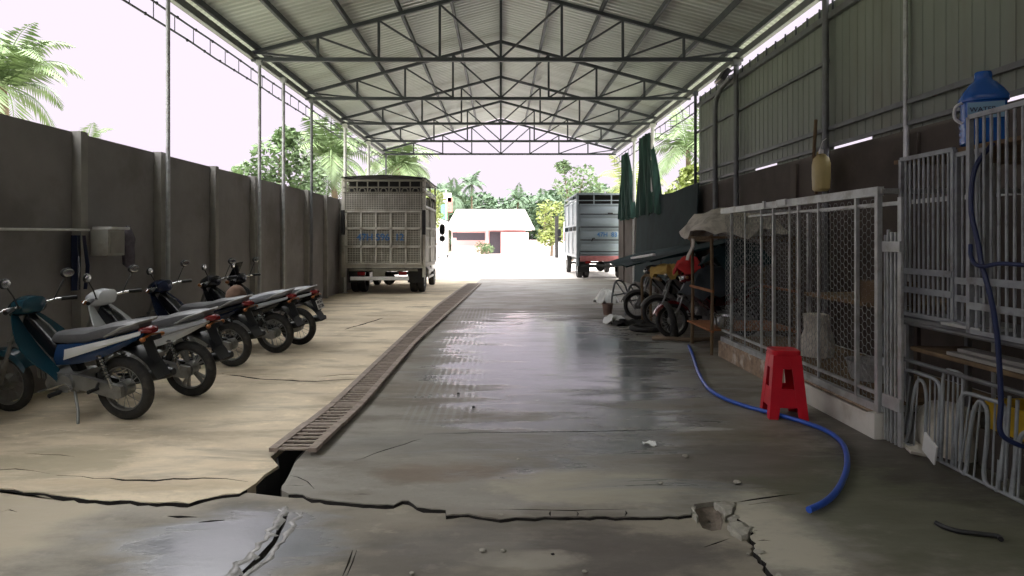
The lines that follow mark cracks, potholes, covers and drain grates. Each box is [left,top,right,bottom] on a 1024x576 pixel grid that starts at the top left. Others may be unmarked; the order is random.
pothole [696,506,723,531]
crack [4,454,247,482]
crack [227,374,360,382]
crack [737,519,773,576]
